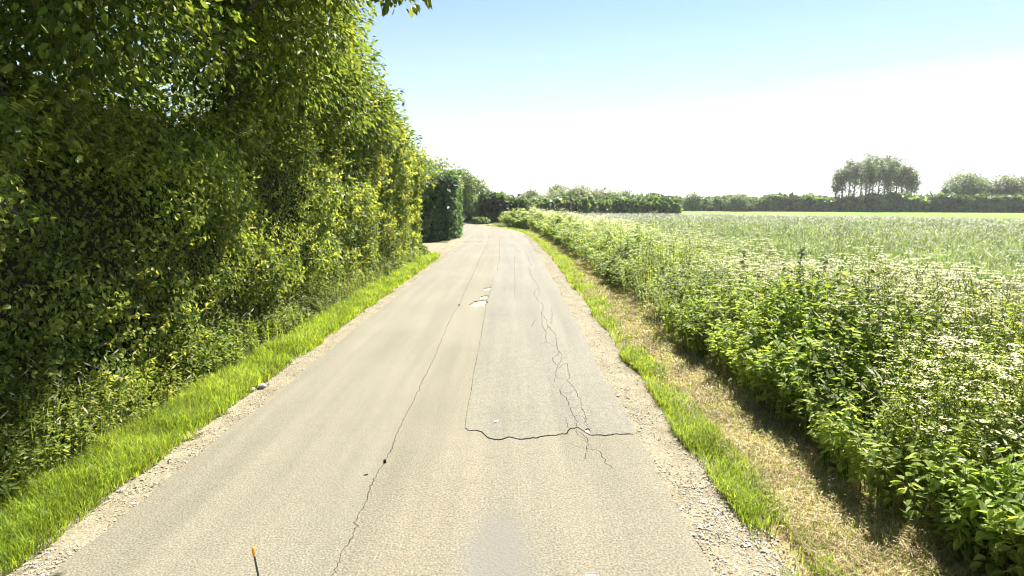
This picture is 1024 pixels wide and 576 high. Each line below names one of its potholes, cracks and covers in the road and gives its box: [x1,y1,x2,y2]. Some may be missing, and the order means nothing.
crack [332,239,629,575]
